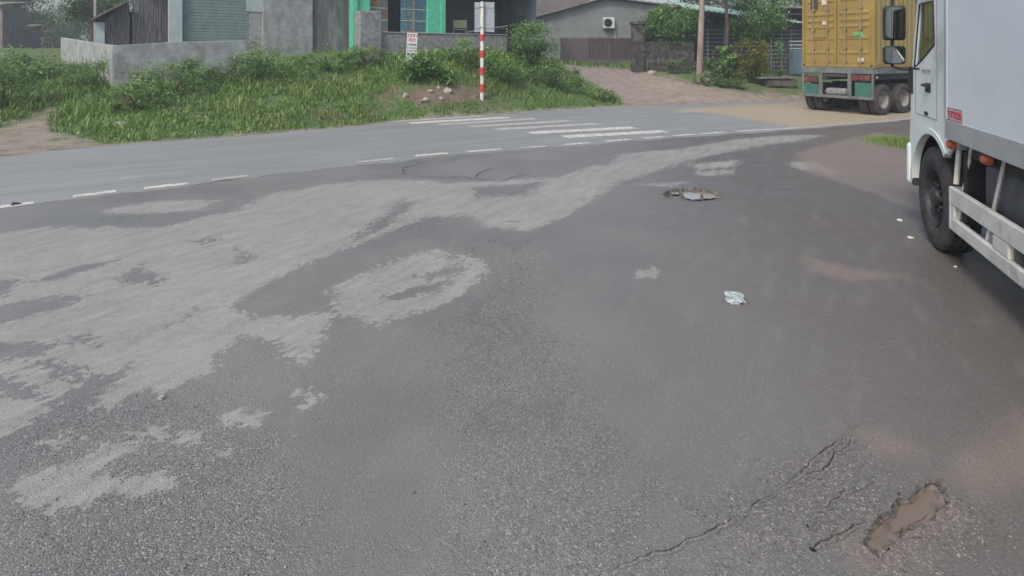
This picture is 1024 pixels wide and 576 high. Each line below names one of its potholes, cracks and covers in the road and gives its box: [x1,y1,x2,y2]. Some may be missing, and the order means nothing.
crack [600,421,961,576]
pothole [856,476,955,559]
crack [399,161,529,181]
pothole [659,187,725,202]
